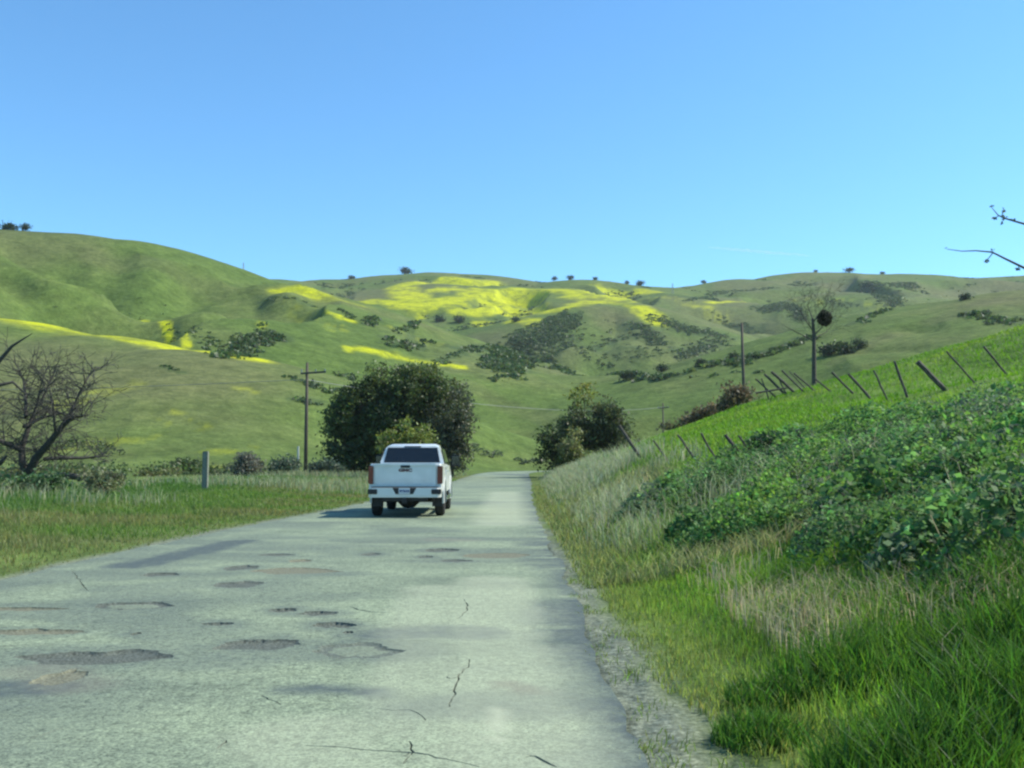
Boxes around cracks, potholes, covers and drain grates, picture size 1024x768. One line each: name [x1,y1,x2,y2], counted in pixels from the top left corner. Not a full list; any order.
crack [306,741,479,767]
pothole [95,602,176,610]
crack [447,659,470,707]
pothole [14,649,174,665]
pothole [212,639,300,651]
pothole [311,642,406,659]
